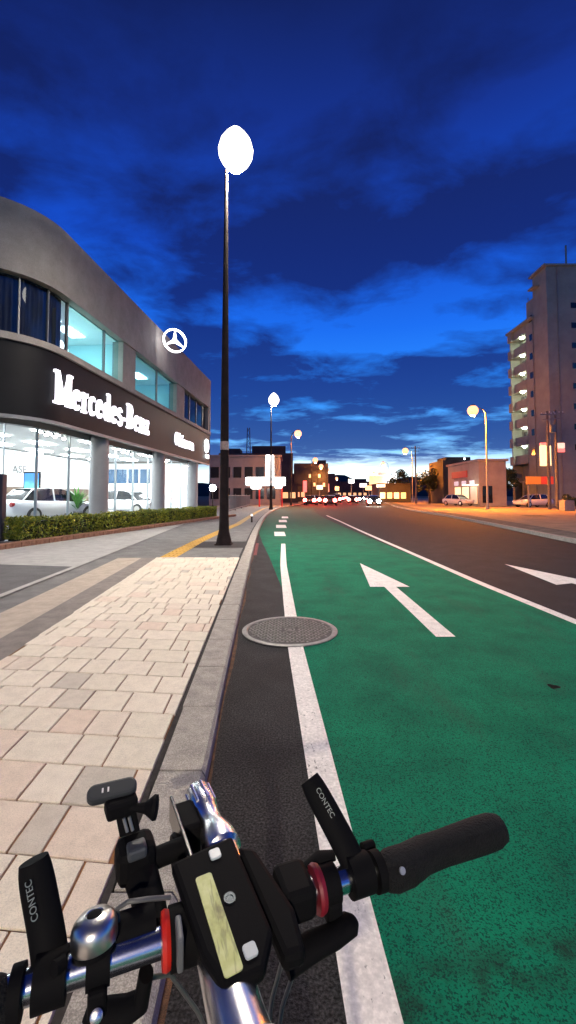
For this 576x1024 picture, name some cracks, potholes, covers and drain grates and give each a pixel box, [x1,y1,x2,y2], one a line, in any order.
manhole cover [242,616,338,647]
